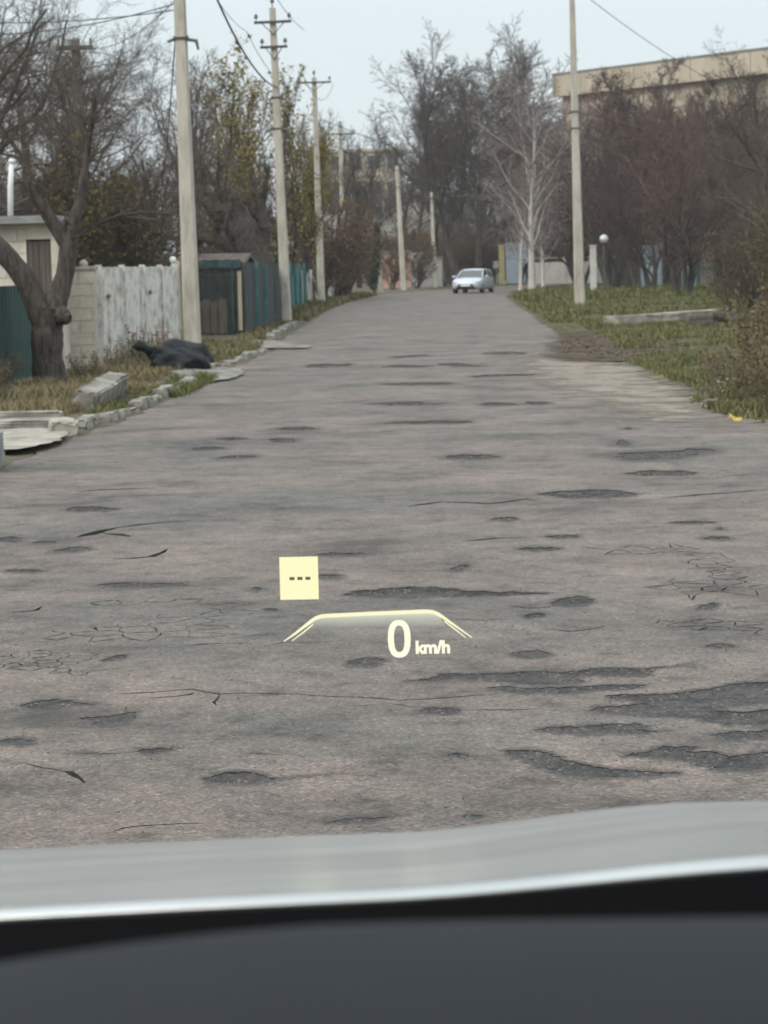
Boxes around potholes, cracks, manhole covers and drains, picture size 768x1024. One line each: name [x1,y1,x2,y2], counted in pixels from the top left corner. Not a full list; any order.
pothole [344,587,547,599]
pothole [505,750,680,778]
crack [657,619,763,635]
pothole [539,490,635,499]
pothole [617,448,716,461]
crack [43,597,260,646]
crack [126,689,527,711]
crack [0,650,119,675]
pothole [412,667,663,685]
pothole [203,771,278,783]
pothole [589,682,768,726]
pothole [80,712,136,726]
